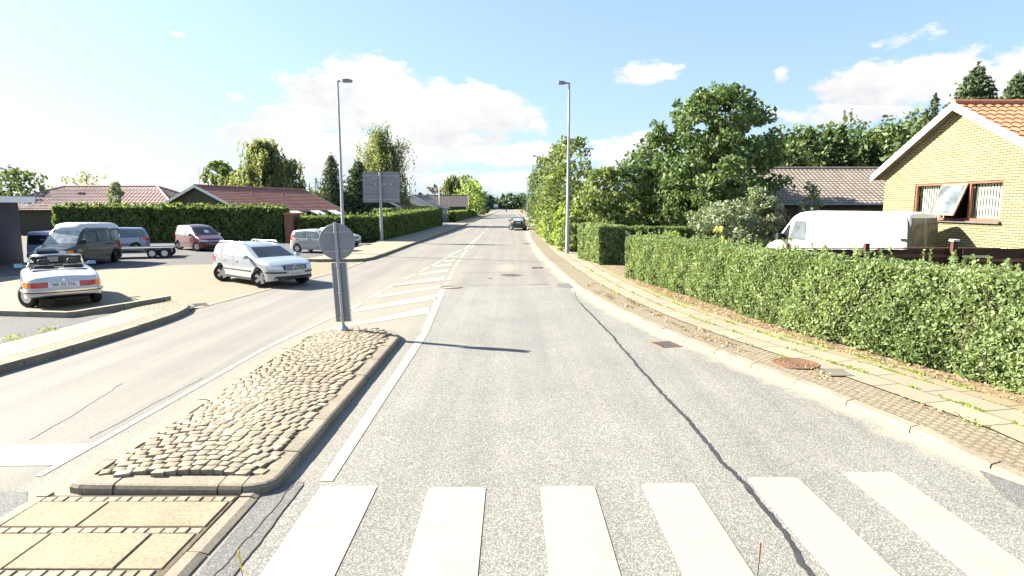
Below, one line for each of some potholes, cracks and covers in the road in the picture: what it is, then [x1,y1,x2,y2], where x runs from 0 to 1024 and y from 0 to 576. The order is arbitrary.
crack [29,378,202,440]
manhole cover [771,357,820,370]
